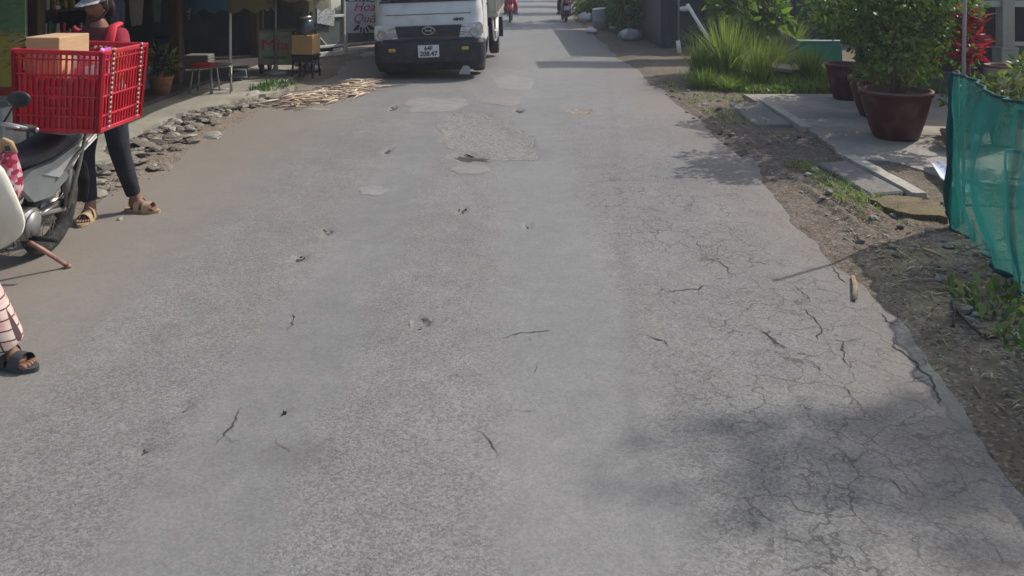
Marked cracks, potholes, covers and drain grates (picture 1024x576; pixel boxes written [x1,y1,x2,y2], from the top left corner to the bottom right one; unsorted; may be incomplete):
crack [690,329,787,369]
crack [879,312,942,406]
crack [662,243,736,294]
crack [797,287,853,365]
crack [217,406,244,442]
pothole [409,317,432,330]
pothole [455,155,486,163]
